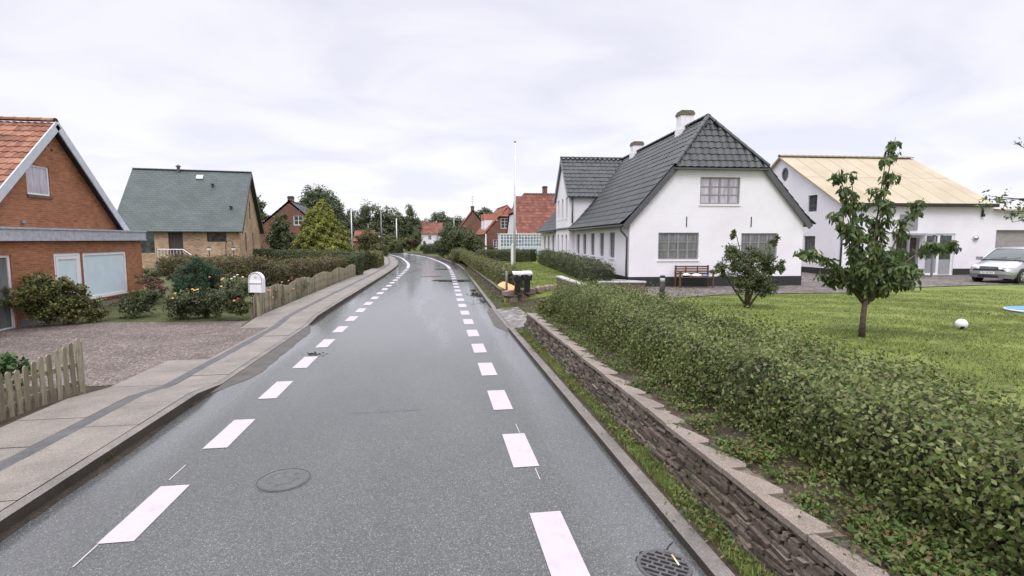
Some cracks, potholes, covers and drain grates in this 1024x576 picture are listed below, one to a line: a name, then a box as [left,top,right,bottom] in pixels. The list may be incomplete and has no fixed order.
drain grate [636,549,693,576]
manhole cover [254,468,312,492]
